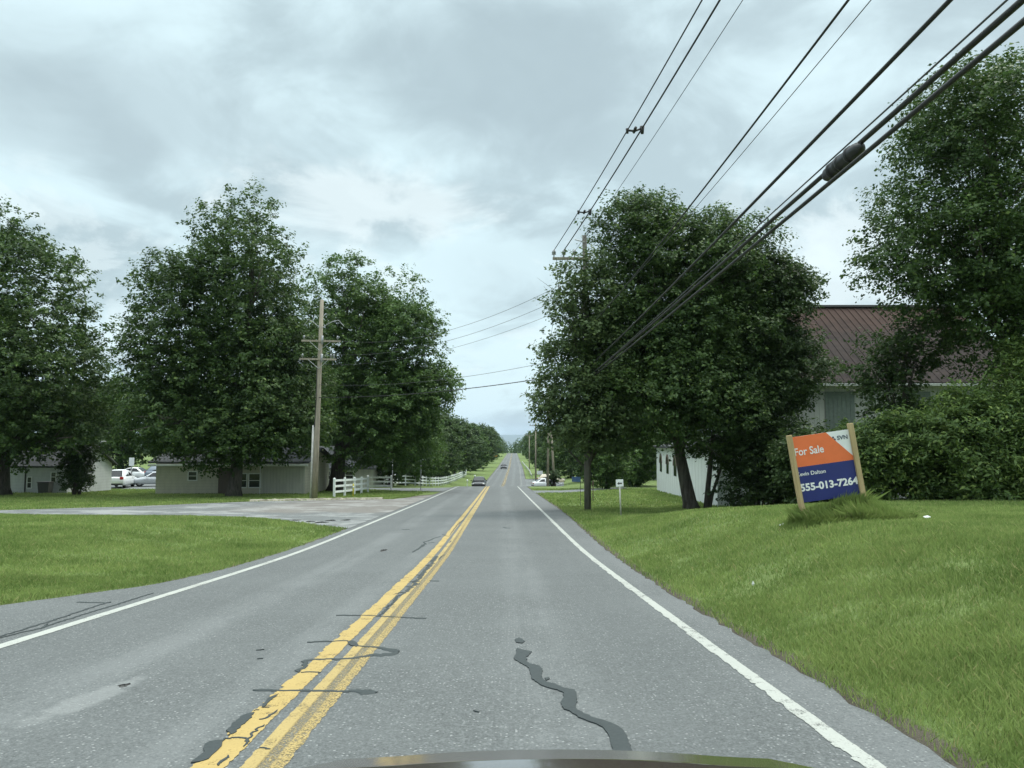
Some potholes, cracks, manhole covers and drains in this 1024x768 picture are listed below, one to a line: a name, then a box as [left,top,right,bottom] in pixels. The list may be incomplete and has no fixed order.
crack [0,593,153,638]
